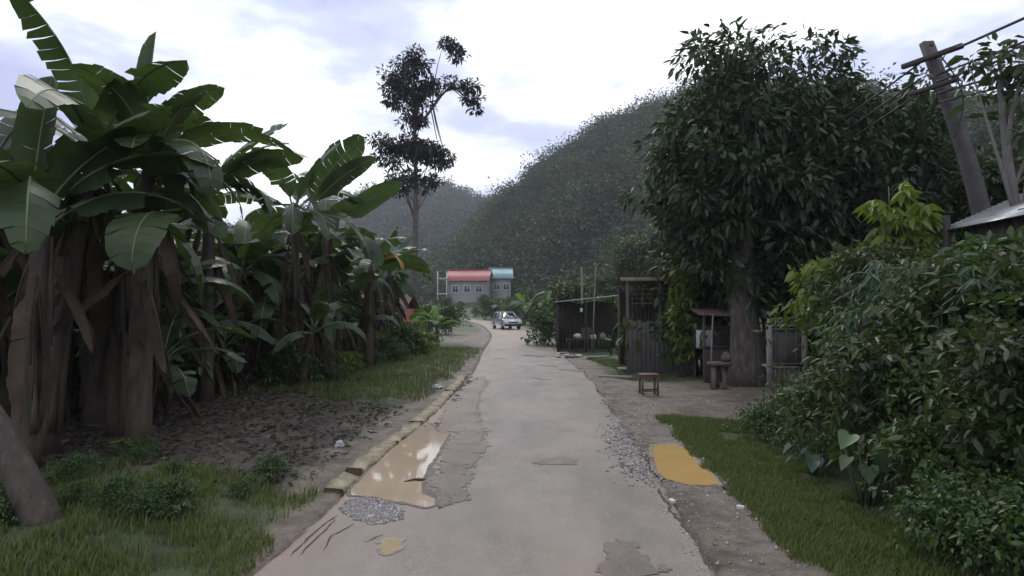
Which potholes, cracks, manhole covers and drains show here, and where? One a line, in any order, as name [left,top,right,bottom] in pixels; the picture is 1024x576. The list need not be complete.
crack [291,515,381,555]
pothole [346,422,452,509]
